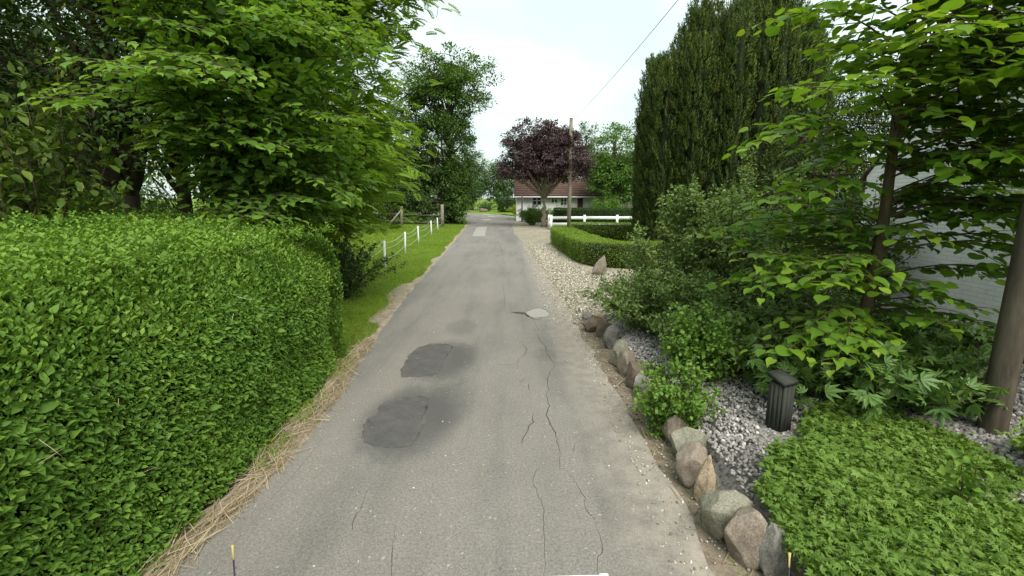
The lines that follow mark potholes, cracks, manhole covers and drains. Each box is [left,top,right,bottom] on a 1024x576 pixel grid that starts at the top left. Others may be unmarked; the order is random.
crack [509,320,603,572]
